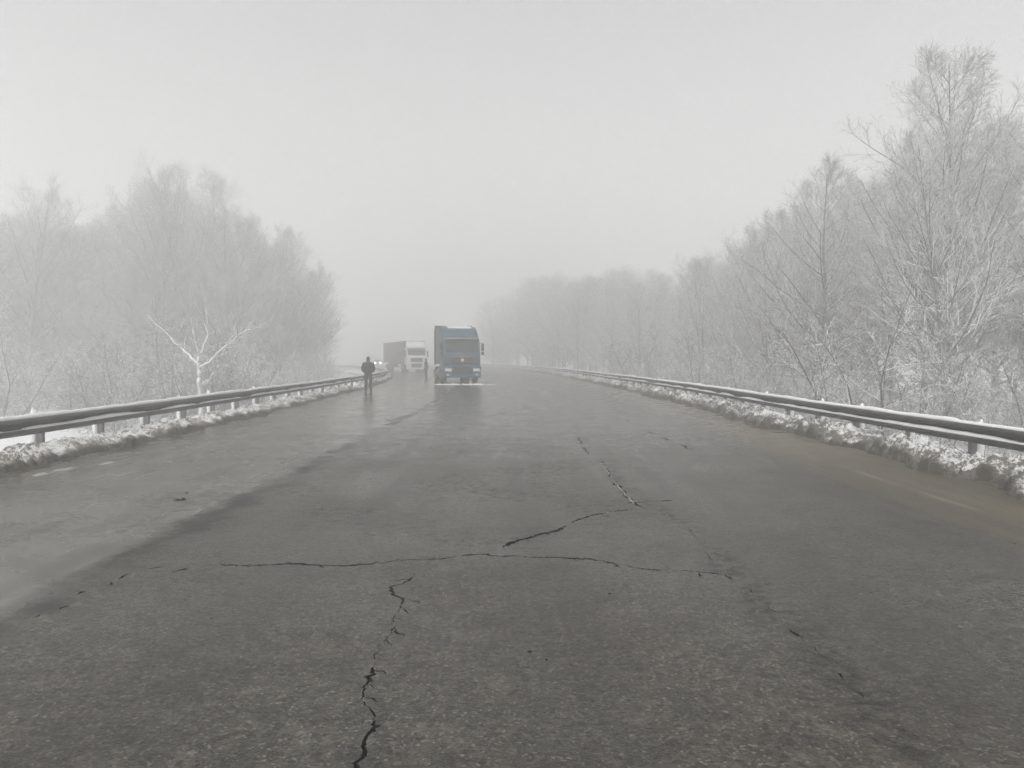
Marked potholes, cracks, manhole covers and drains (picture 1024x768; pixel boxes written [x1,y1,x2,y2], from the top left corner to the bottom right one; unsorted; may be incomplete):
crack [33,562,201,618]
crack [220,500,864,768]
